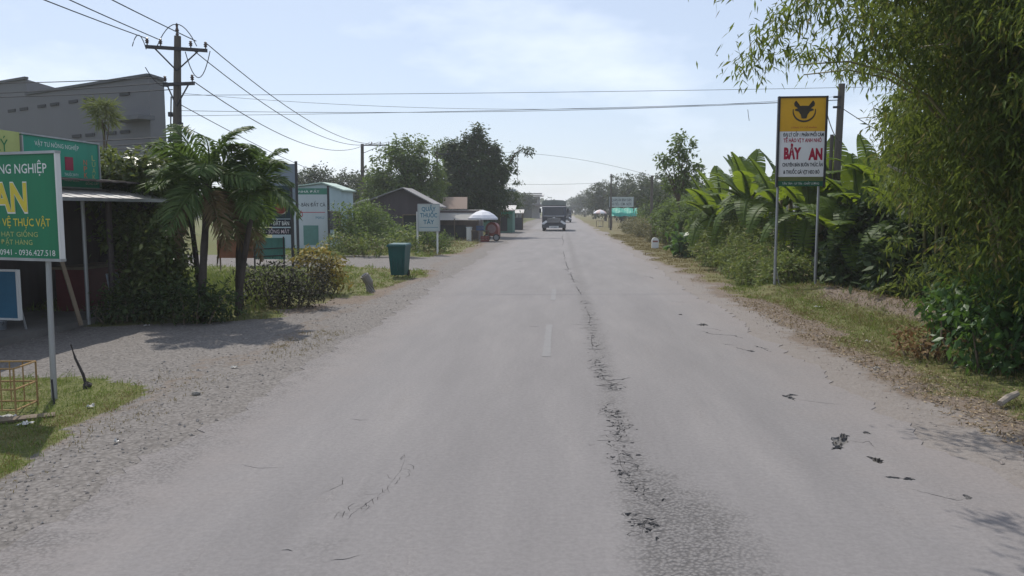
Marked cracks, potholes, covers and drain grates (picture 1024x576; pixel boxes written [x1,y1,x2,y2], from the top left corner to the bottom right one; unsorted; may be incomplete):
crack [562,236,669,541]
pothole [831,433,850,450]
crack [335,456,414,518]
